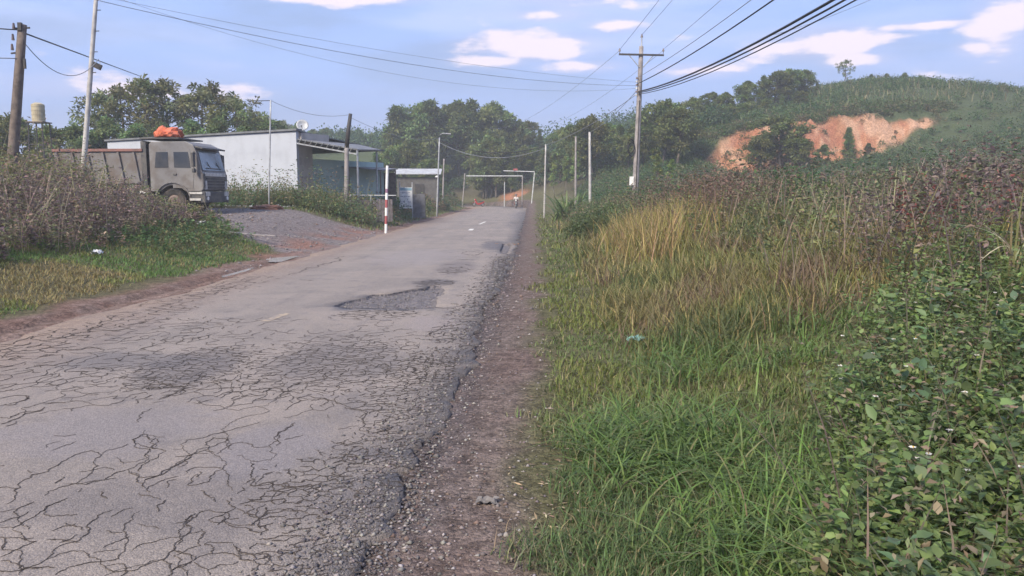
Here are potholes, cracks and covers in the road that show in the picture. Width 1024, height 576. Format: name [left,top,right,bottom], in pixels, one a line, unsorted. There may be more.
pothole [335,285,445,310]
crack [0,236,520,426]
crack [0,356,463,576]
